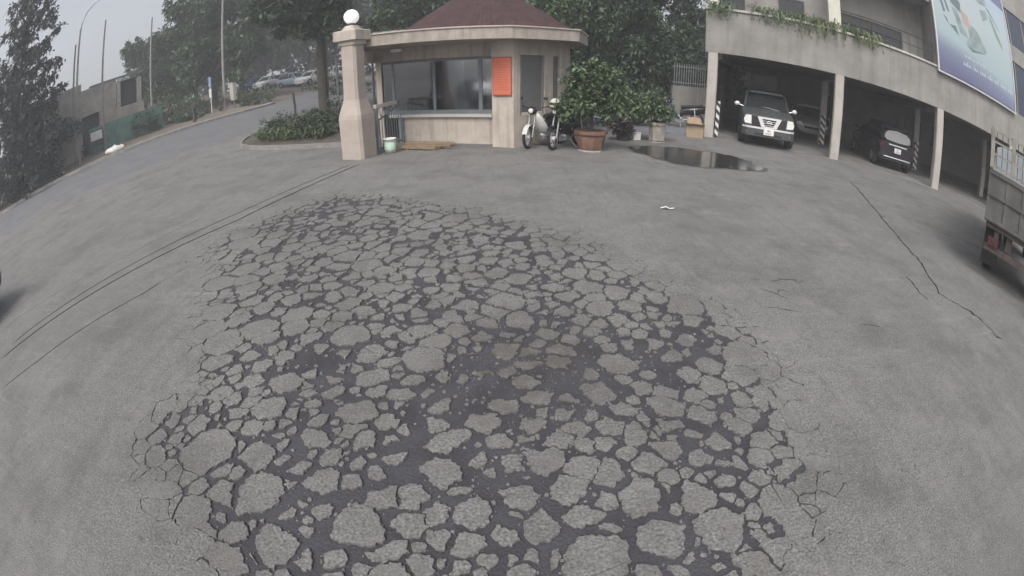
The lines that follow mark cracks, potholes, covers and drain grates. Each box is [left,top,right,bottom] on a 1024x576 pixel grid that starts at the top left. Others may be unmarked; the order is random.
crack [3,182,1002,576]
